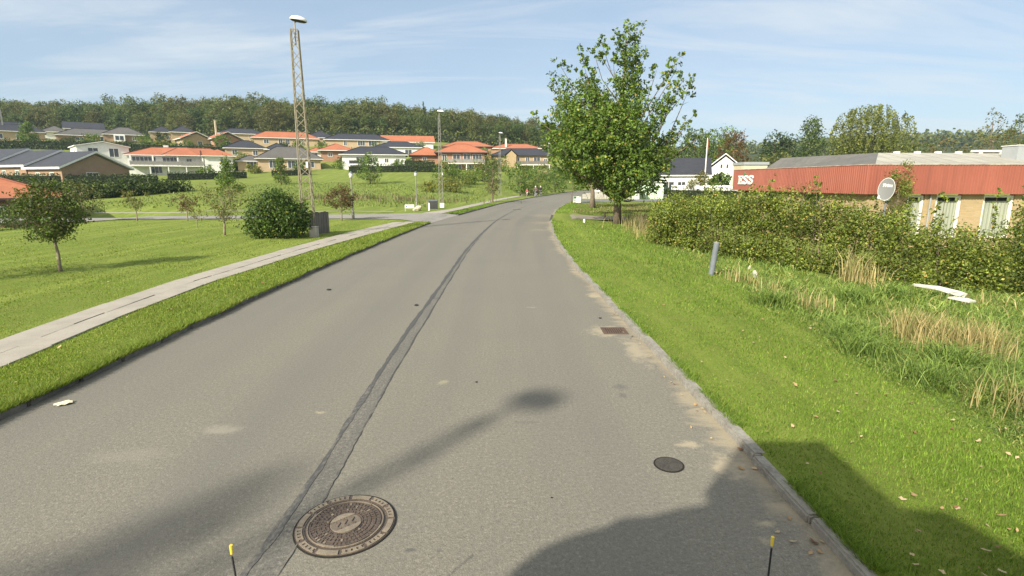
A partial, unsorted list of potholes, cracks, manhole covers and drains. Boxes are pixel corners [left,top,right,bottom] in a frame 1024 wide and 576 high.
manhole cover [653,457,684,473]
manhole cover [292,495,397,558]
